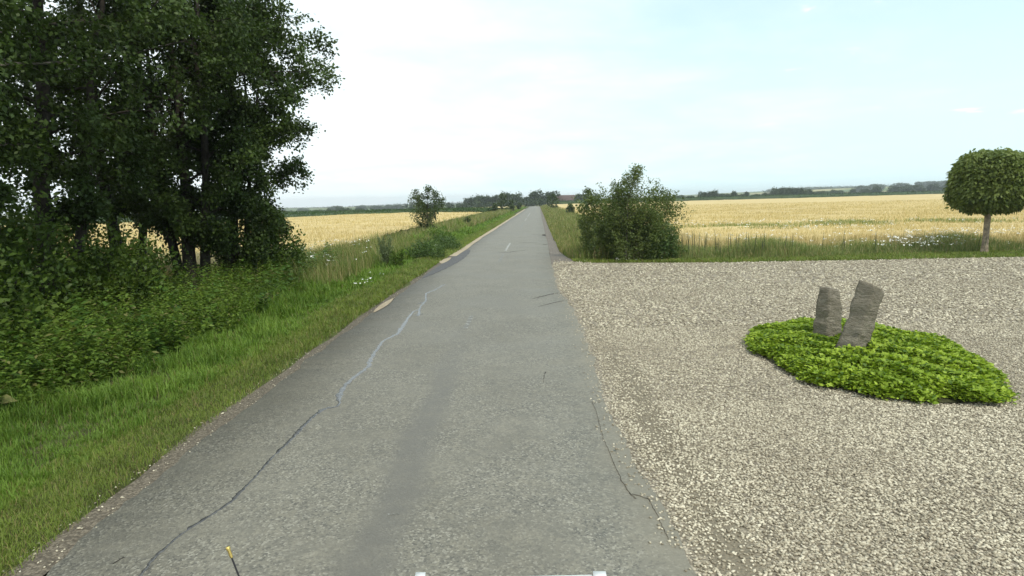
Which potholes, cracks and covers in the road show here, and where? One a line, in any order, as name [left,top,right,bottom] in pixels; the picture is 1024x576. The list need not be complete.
crack [592,402,669,540]
